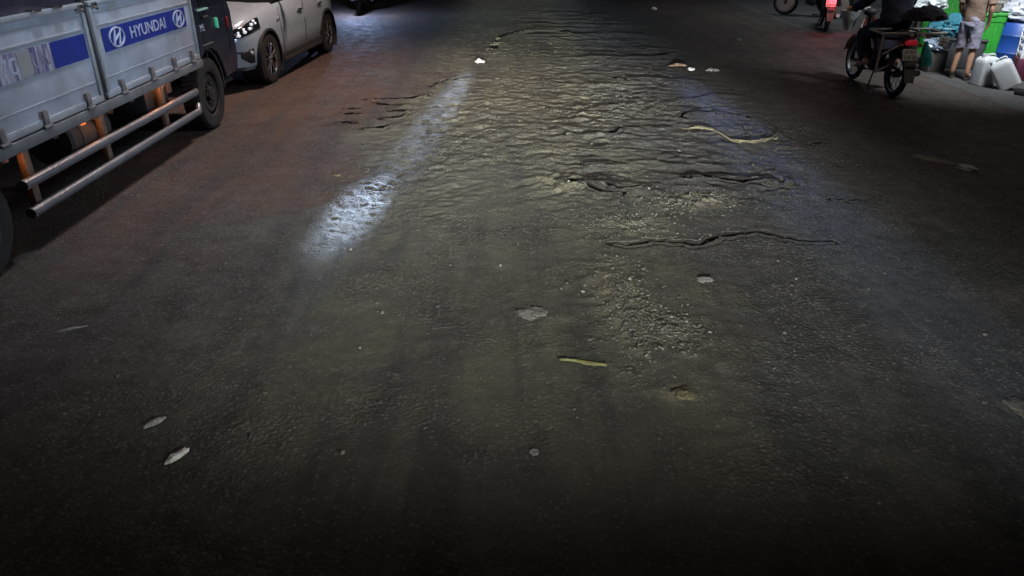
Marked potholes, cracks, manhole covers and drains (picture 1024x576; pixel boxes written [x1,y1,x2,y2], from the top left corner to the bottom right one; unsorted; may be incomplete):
crack [683,174,780,185]
crack [612,230,834,249]
crack [559,93,751,196]
crack [337,76,500,131]
